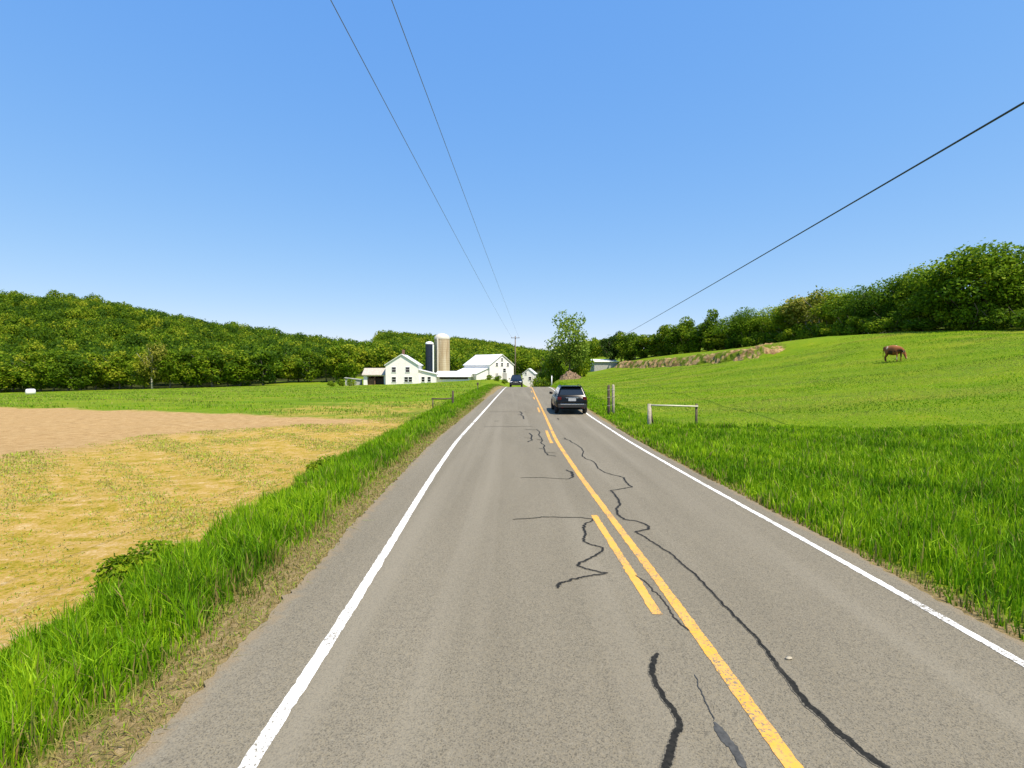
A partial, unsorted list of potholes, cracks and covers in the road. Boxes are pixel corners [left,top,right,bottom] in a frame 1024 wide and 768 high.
crack [635,575,689,630]
crack [491,411,574,479]
